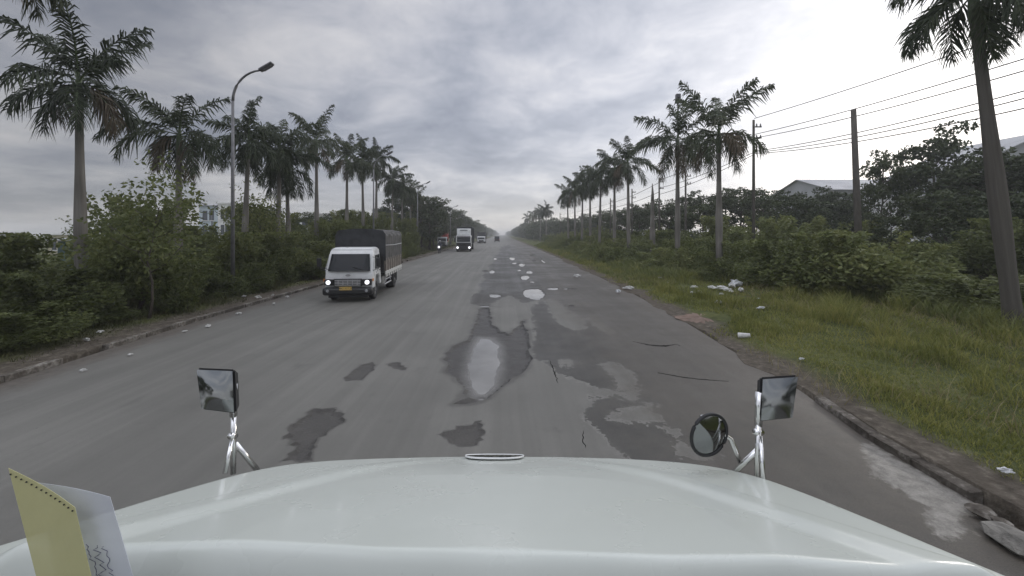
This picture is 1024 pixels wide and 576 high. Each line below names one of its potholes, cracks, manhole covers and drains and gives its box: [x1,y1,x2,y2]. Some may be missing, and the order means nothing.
pothole [522,288,546,300]
pothole [443,308,533,404]
